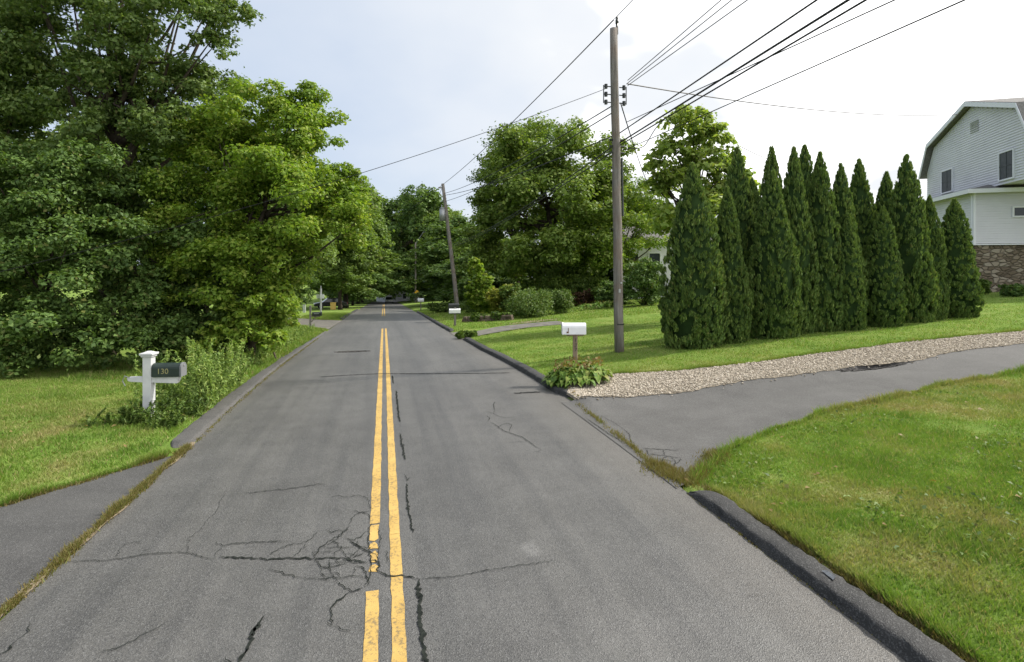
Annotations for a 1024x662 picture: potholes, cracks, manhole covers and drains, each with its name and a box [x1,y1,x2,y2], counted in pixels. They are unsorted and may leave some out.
crack [72,495,549,662]
crack [392,375,414,531]
crack [602,416,680,466]
